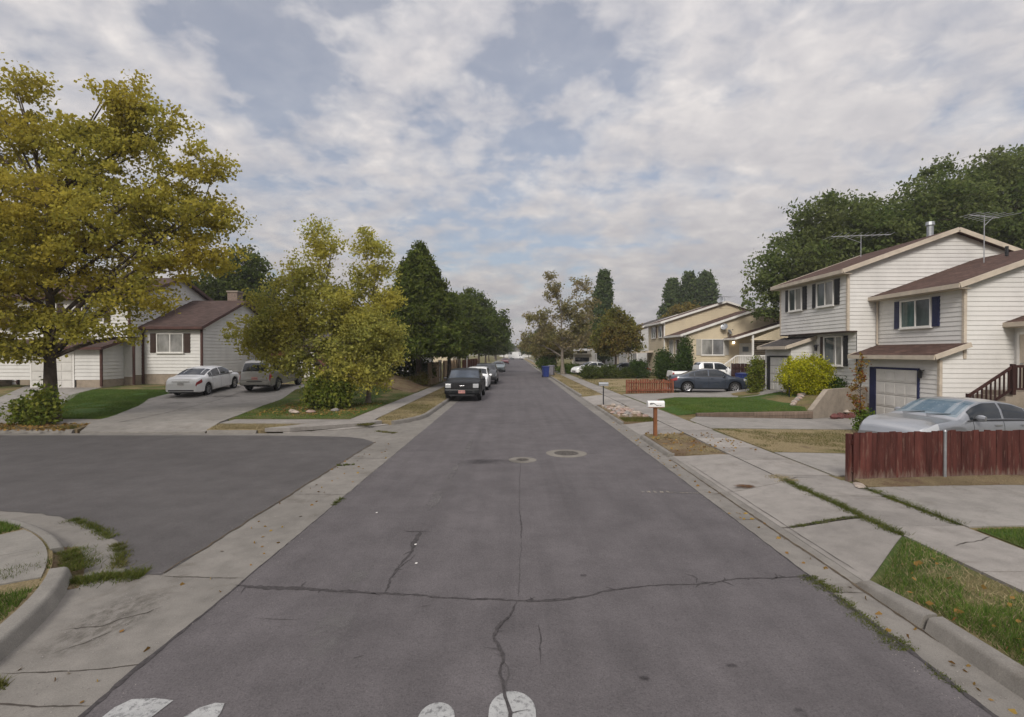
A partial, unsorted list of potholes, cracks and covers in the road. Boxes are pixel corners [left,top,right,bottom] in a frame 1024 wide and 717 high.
crack [60,607,160,651]
crack [237,461,939,717]
manhole cover [546,449,587,458]
